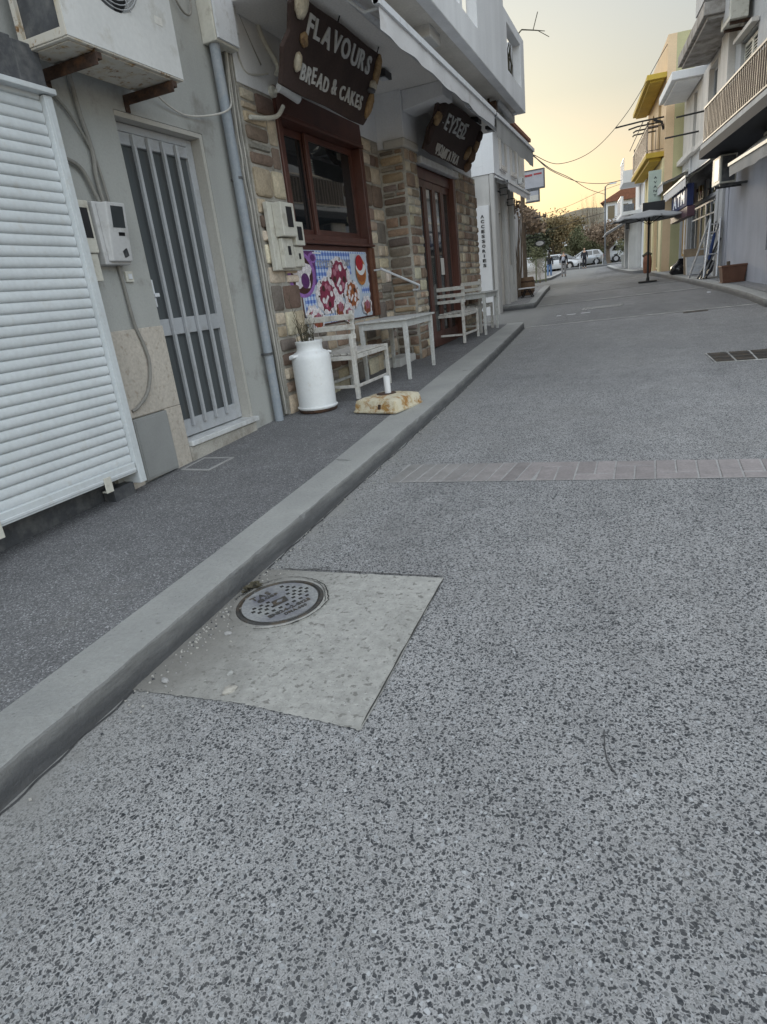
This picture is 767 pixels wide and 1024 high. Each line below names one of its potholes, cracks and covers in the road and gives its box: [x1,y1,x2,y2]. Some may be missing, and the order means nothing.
manhole cover [229,578,330,630]
drain grate [704,349,767,363]
crack [603,729,617,775]
manhole cover [181,457,234,471]
